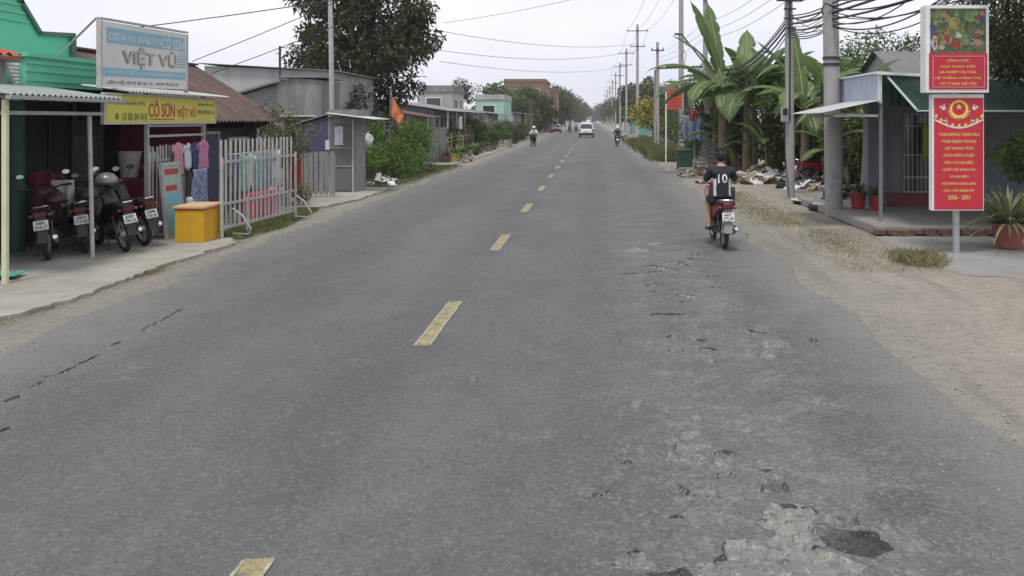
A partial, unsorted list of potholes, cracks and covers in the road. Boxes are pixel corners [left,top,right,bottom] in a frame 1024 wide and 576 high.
crack [0,308,183,404]
pothole [712,450,738,482]
pothole [660,431,712,466]
pothole [758,469,790,497]
pothole [695,503,868,576]
pothole [820,529,894,559]
